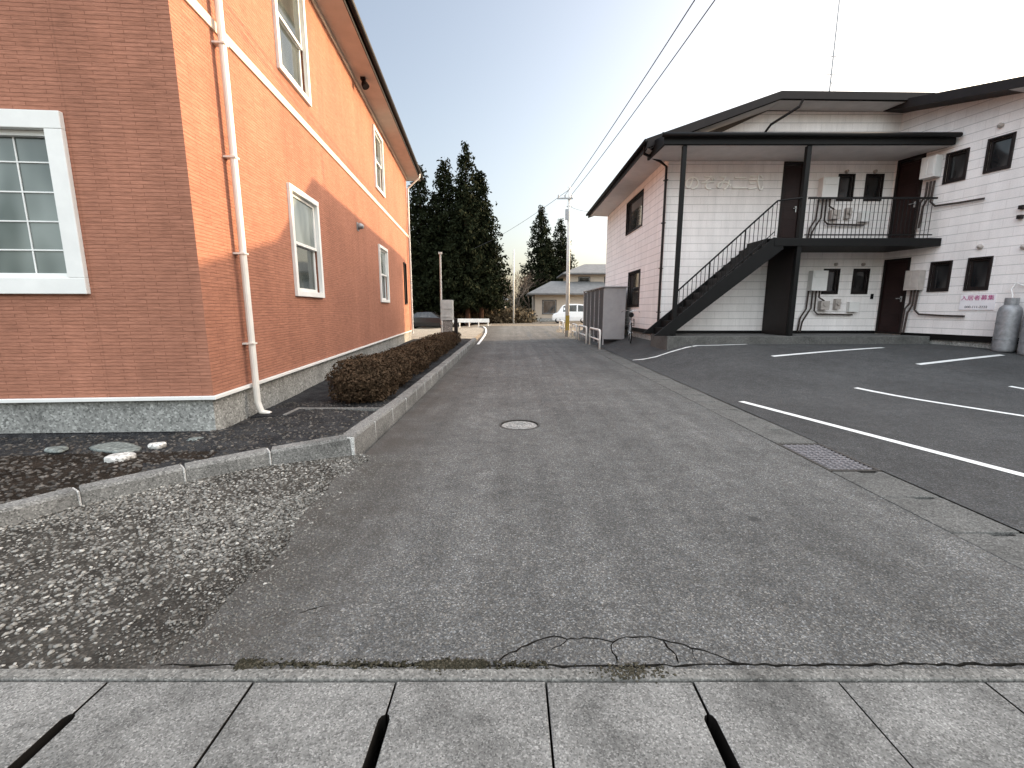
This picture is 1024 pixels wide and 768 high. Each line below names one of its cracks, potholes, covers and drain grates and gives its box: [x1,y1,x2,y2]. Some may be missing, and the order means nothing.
drain grate [776,443,882,473]
manhole cover [499,419,540,430]
crack [161,635,1024,668]
